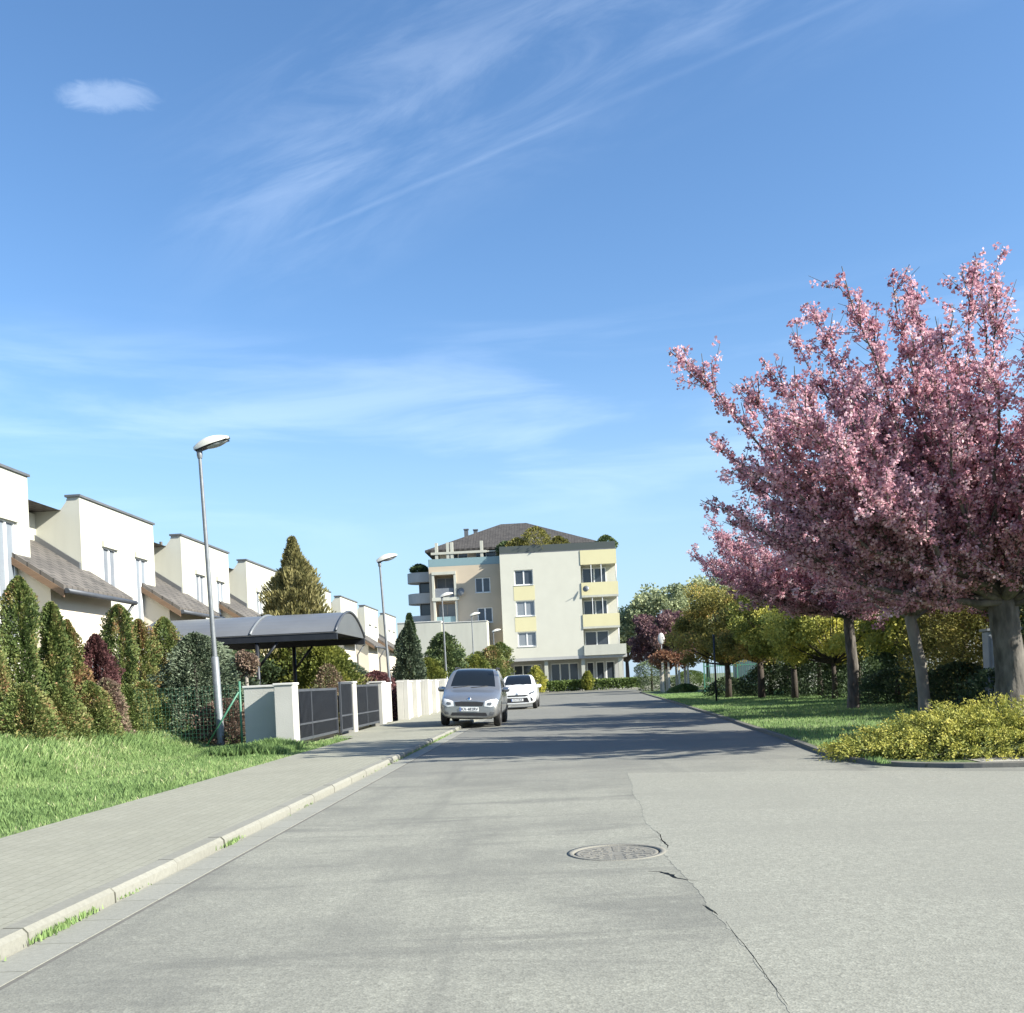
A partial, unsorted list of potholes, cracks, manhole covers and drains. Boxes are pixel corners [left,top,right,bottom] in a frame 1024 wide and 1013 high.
manhole cover [567,843,666,861]
